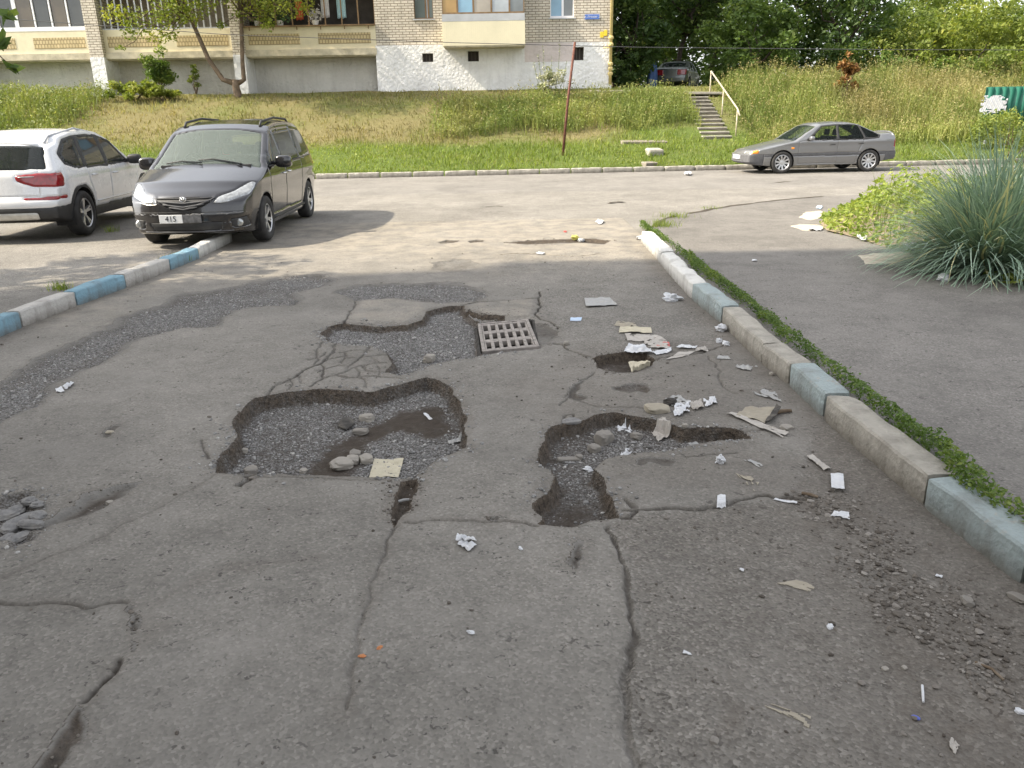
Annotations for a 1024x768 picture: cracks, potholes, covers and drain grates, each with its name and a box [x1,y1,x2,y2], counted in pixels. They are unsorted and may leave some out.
pothole [366,473,432,532]
crack [462,291,644,426]
pothole [513,408,773,546]
pothole [578,351,670,375]
crack [0,439,541,711]
crack [342,301,357,323]
drain grate [474,319,540,356]
pothole [186,369,497,493]
crack [618,492,809,521]
crack [264,342,403,396]
pothole [308,306,516,376]
pothole [0,481,71,561]
